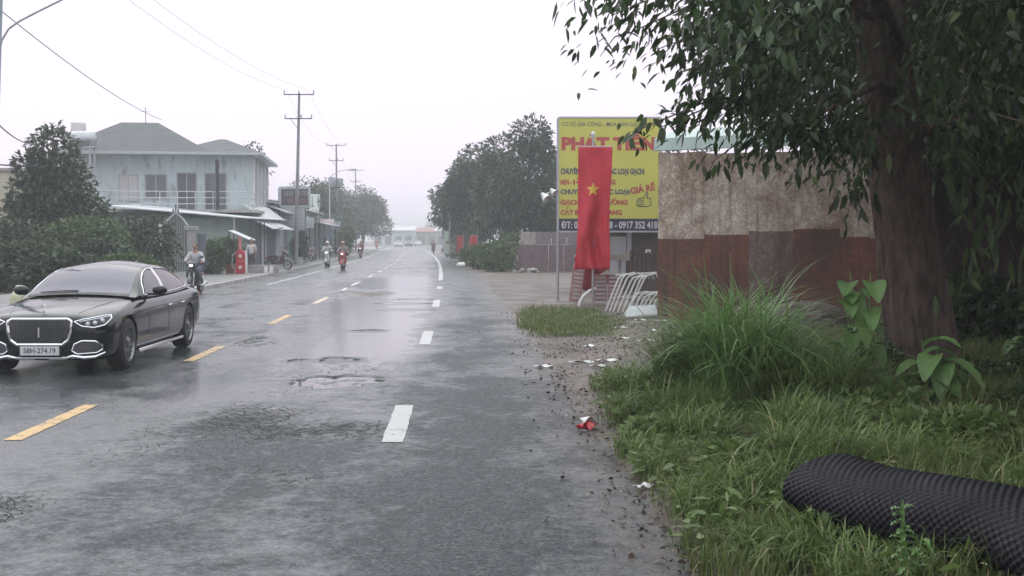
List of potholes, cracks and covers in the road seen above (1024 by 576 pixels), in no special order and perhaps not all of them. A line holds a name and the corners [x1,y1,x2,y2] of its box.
pothole [302,356,371,364]
pothole [275,373,398,391]
crack [0,490,55,528]
pothole [226,336,276,347]
